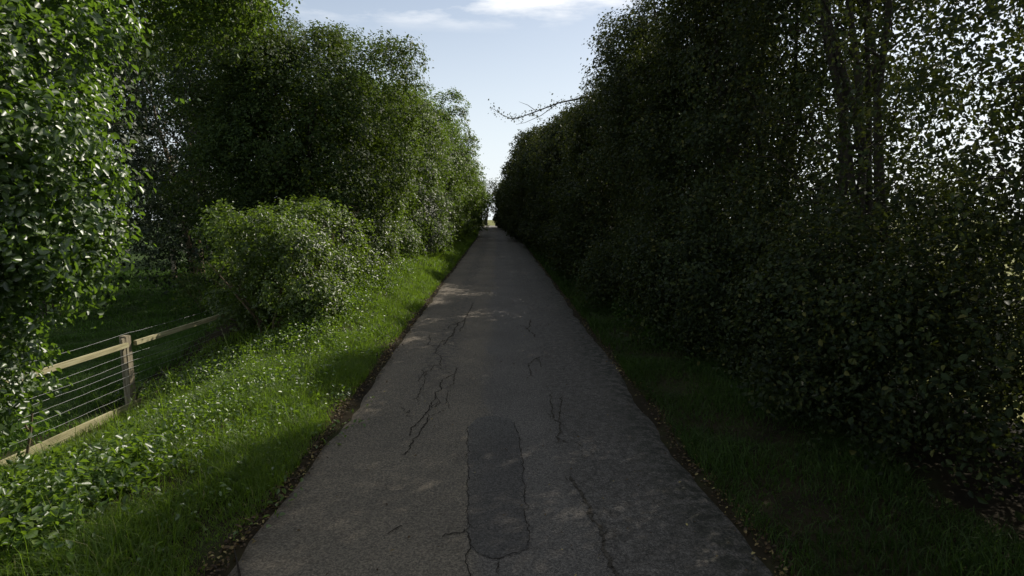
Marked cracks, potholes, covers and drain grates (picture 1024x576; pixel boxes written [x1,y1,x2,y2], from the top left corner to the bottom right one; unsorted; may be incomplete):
crack [549,393,580,445]
crack [442,527,471,576]
crack [565,475,619,576]
crack [399,305,473,455]
